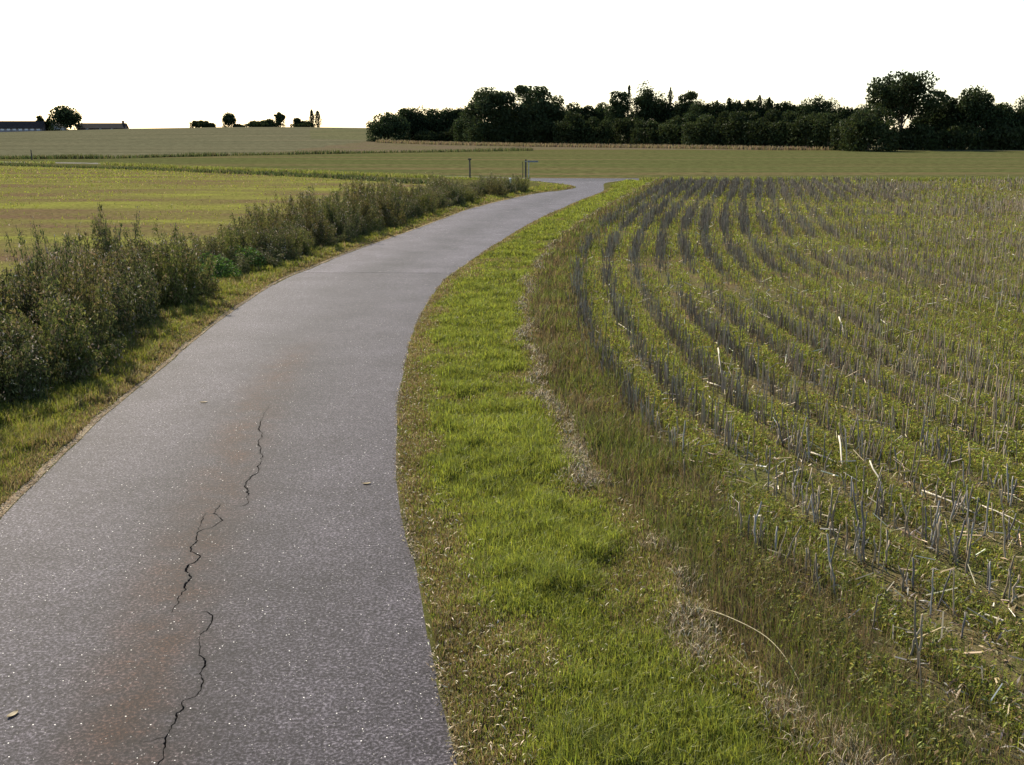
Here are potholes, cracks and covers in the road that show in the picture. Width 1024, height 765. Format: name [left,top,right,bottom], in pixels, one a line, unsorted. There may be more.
crack [243,407,269,506]
crack [146,612,213,764]
crack [171,505,223,613]
